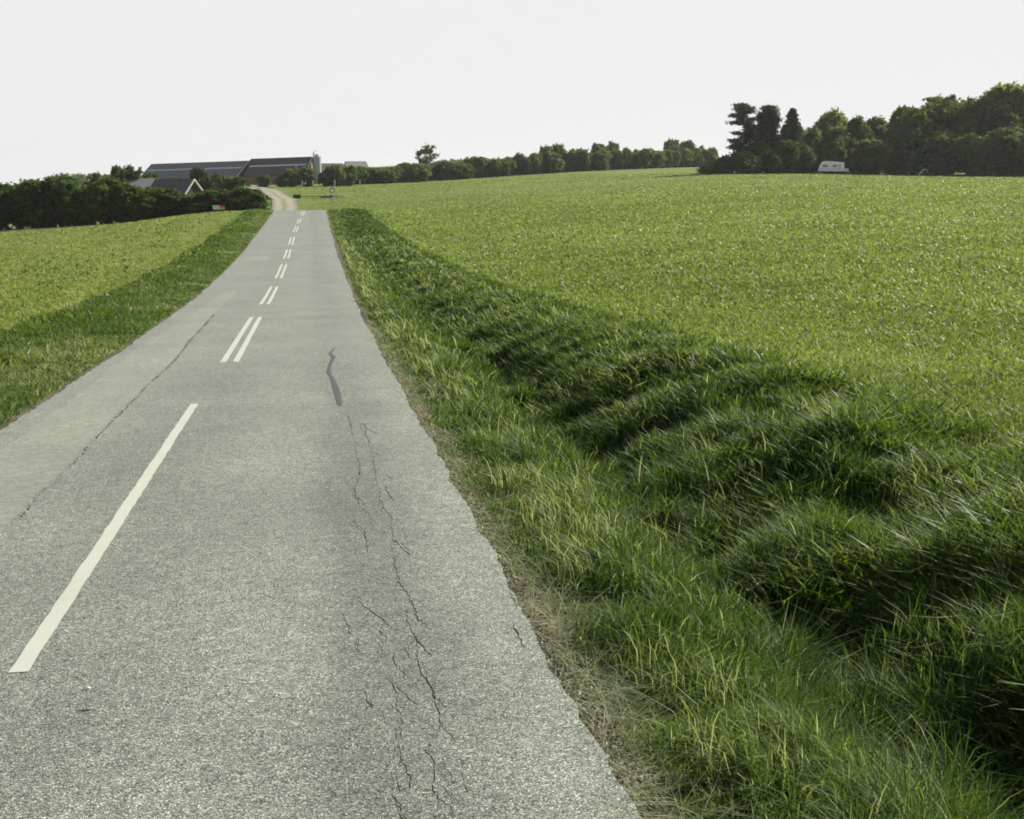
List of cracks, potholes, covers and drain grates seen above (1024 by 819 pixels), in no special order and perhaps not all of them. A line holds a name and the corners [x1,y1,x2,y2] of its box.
crack [507,582,525,648]
